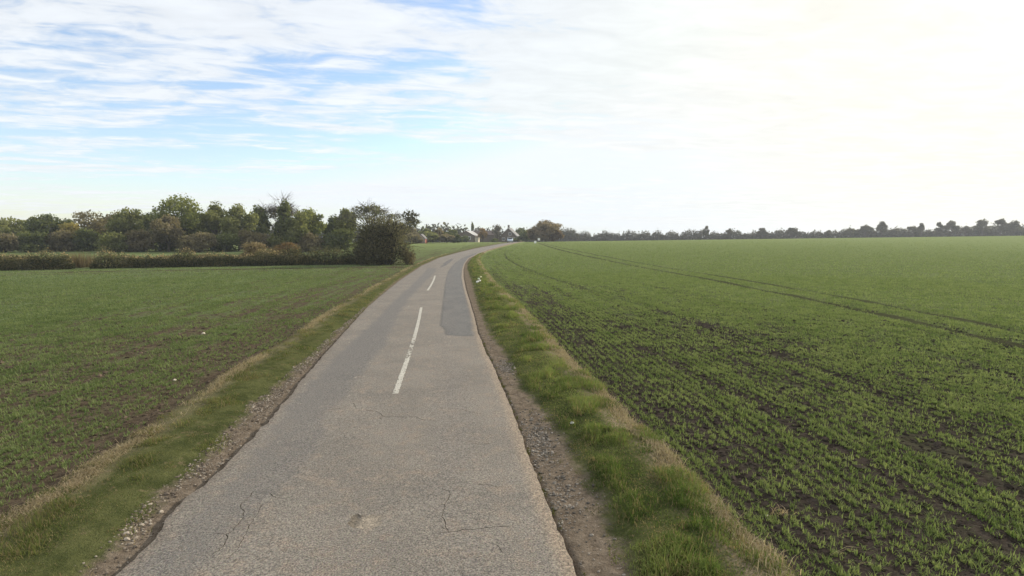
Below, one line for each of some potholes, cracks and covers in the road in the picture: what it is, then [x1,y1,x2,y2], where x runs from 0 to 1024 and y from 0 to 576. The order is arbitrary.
pothole [347,514,382,529]
crack [442,488,513,554]
crack [209,491,278,559]
